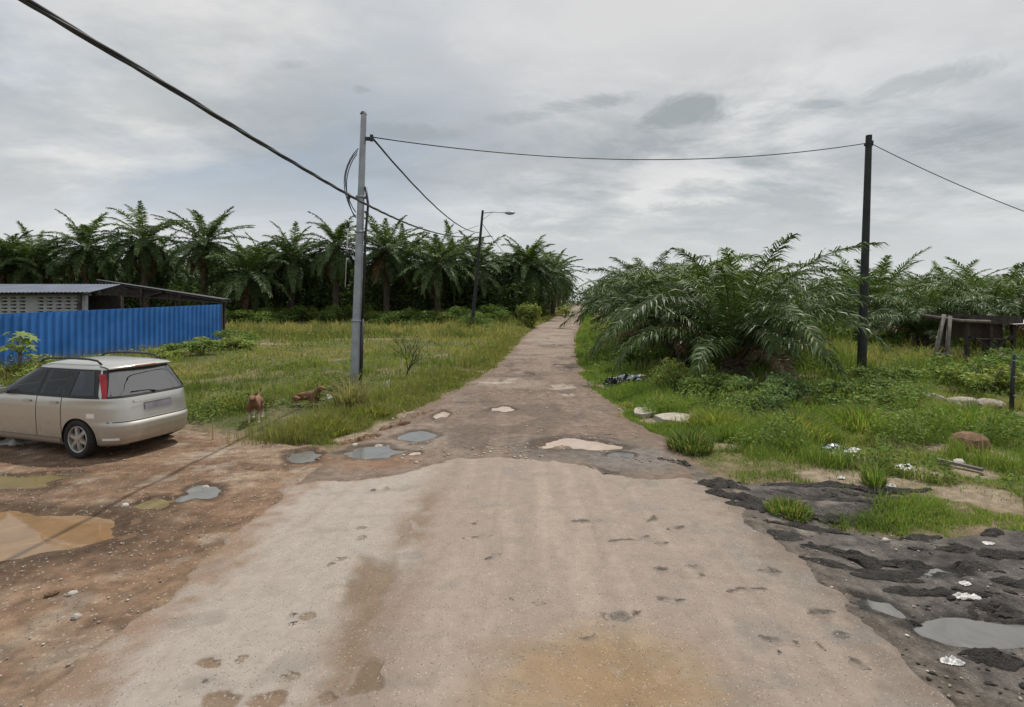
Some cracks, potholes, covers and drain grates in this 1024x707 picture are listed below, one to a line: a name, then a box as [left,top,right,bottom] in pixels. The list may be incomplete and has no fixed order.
pothole [166,480,232,506]
pothole [883,606,1024,661]
pothole [0,497,174,576]
pothole [275,445,331,465]
pothole [385,428,448,444]
pothole [832,586,916,621]
pothole [605,609,638,624]
pothole [326,442,417,462]
